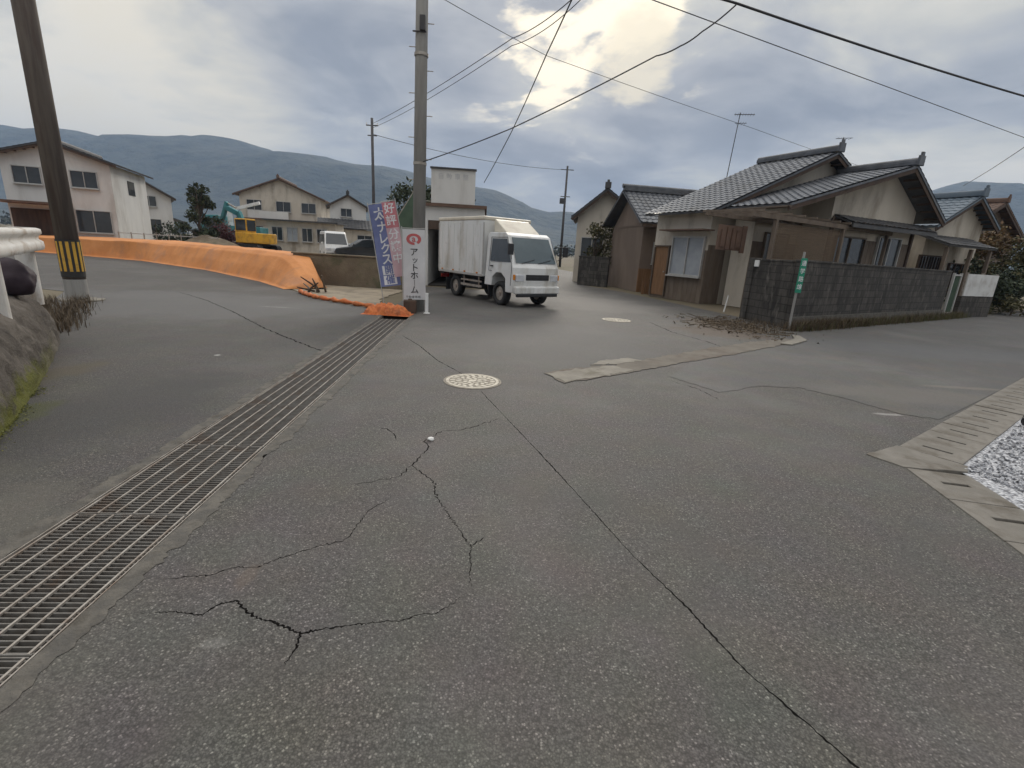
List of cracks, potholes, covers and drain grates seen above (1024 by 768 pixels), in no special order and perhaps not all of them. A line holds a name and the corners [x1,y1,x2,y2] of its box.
drain grate [246,378,339,407]
drain grate [0,514,187,657]
crack [138,419,496,664]
manhole cover [443,373,501,389]
drain grate [355,325,398,336]
drain grate [0,657,30,684]
drain grate [77,444,264,516]
drain grate [316,345,375,361]
drain grate [185,404,309,447]
crack [180,292,320,350]
drain grate [369,318,405,327]
drain grate [337,334,388,347]
